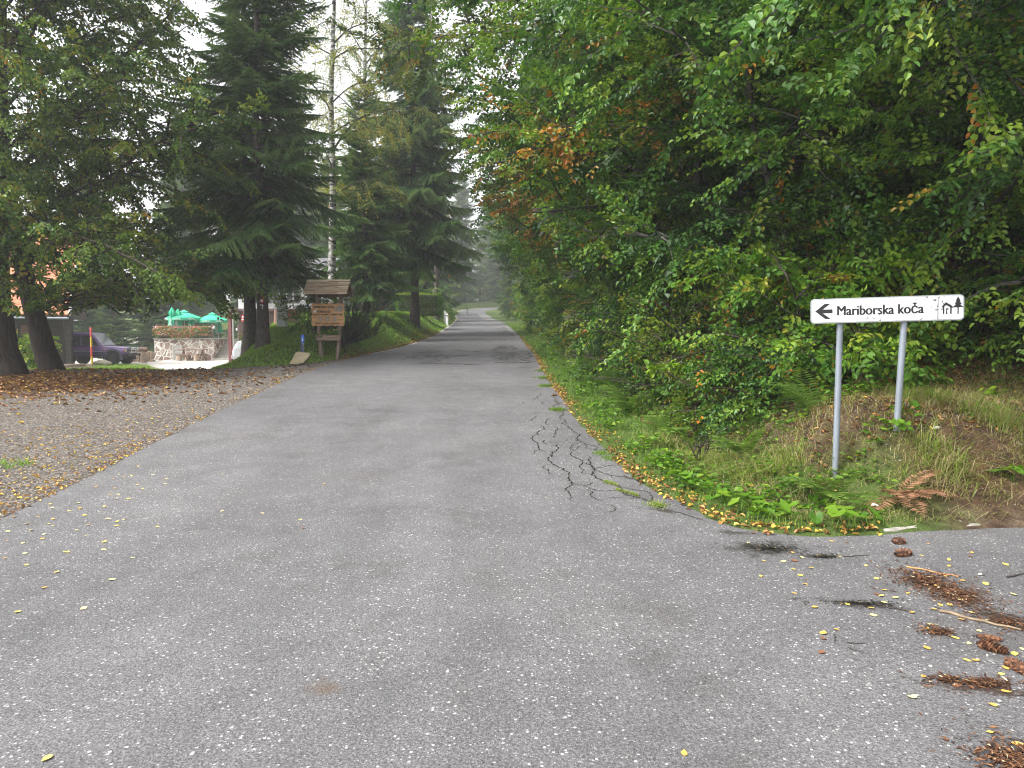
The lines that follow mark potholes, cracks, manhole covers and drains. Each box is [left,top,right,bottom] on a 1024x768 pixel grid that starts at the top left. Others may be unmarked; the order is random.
crack [522,388,703,520]
